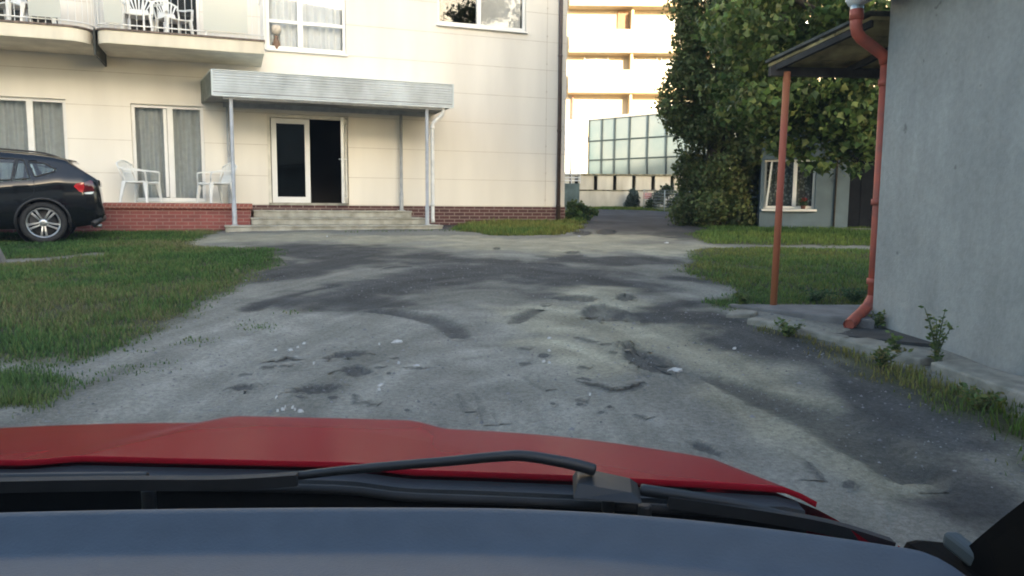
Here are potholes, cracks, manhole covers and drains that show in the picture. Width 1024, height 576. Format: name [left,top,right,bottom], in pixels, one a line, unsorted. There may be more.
pothole [220,383,264,395]
pothole [502,304,559,325]
pothole [574,303,633,324]
pothole [327,363,382,381]
pothole [613,340,679,380]
pothole [278,382,352,398]
pothole [610,293,643,303]
pothole [313,350,376,362]
